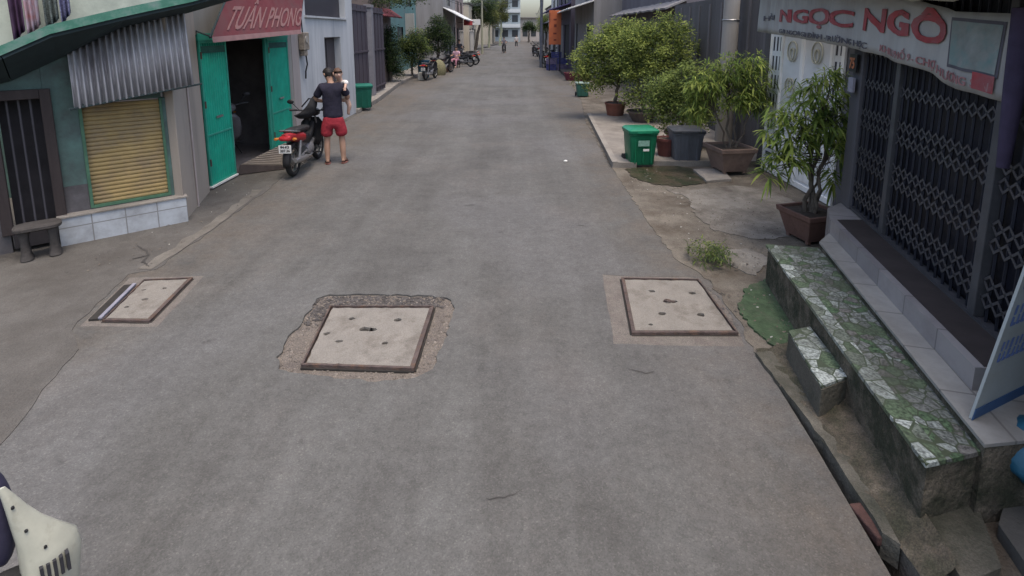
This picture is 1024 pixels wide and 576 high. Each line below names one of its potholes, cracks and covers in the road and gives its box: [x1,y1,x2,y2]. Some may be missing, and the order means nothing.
manhole cover [80,276,203,327]
manhole cover [602,274,744,346]
manhole cover [278,295,454,382]
crack [132,245,150,267]
